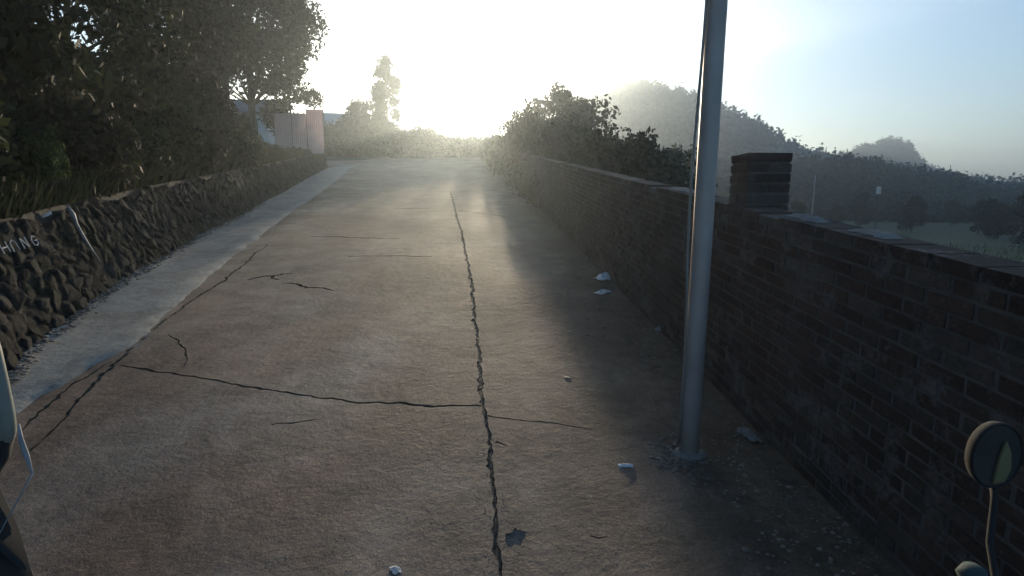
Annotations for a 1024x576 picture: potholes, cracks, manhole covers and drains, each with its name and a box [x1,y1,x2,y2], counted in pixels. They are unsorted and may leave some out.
pothole [505,528,526,547]
crack [22,192,593,576]
